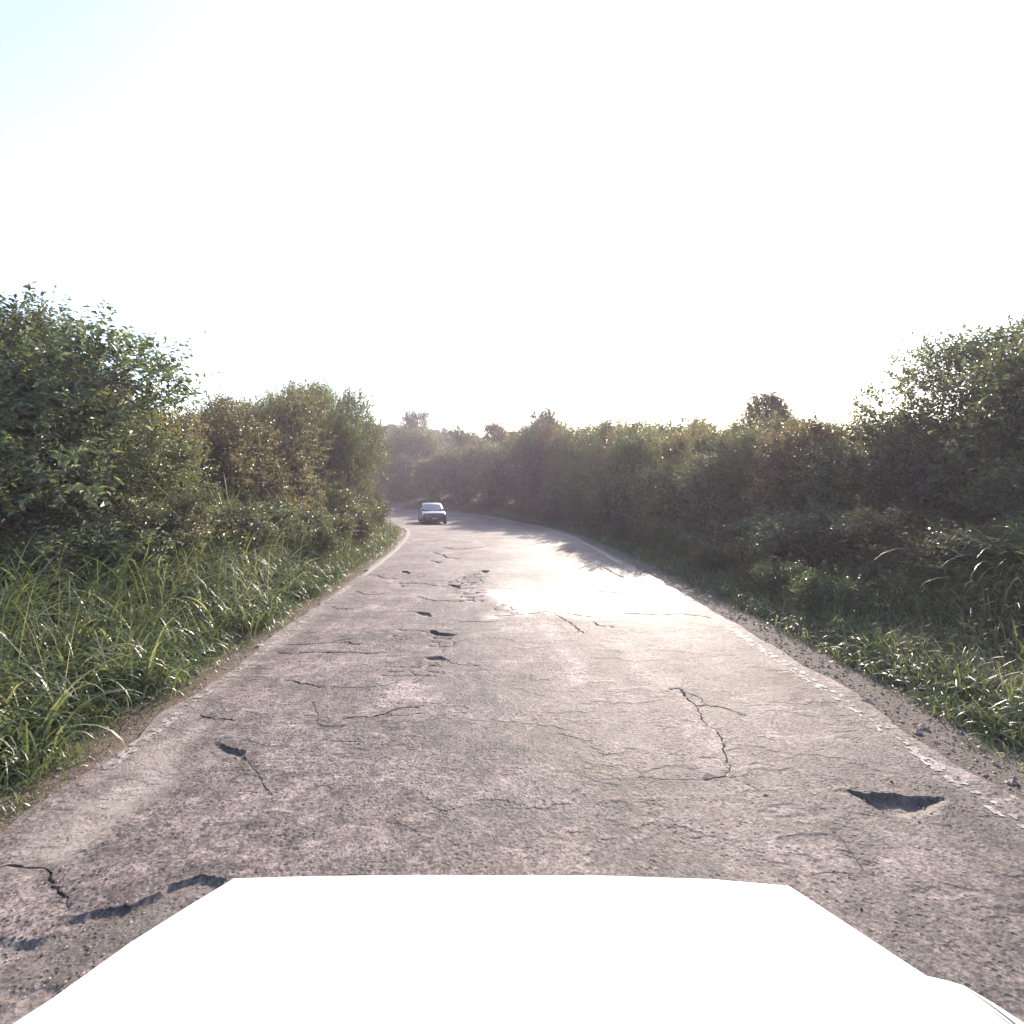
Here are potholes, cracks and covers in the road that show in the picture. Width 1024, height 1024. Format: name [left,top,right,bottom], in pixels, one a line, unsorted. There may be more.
crack [654,688,739,781]
crack [292,629,469,742]
crack [336,575,482,610]
pothole [840,788,950,820]
crack [0,851,93,906]
crack [248,763,271,795]
